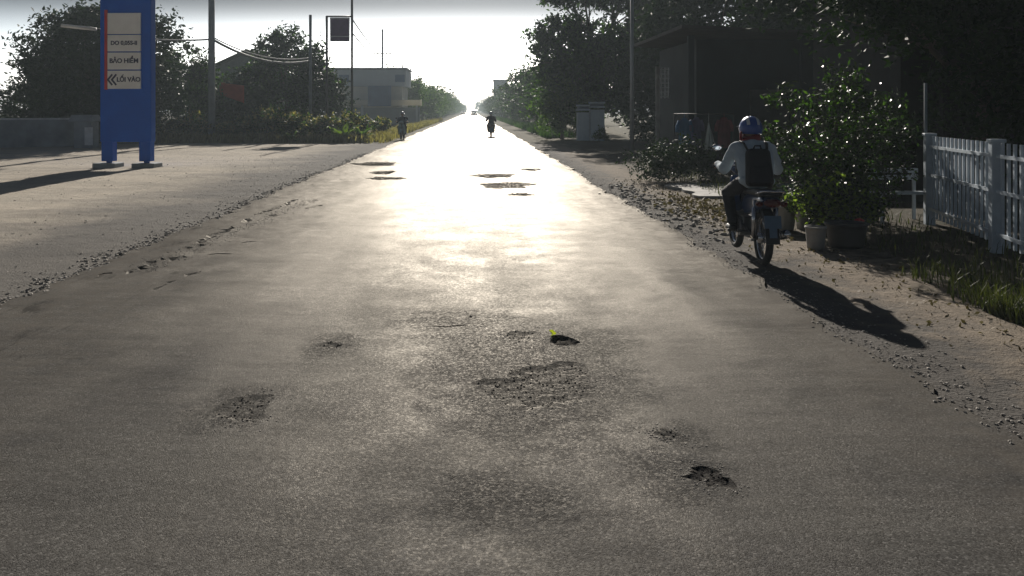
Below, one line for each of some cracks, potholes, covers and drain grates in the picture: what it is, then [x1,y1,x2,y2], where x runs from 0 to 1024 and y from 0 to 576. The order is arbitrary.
pothole [653,428,691,443]
pothole [208,393,275,424]
pothole [680,464,737,489]
pothole [471,361,595,412]
pothole [550,335,580,346]
pothole [503,331,538,342]
